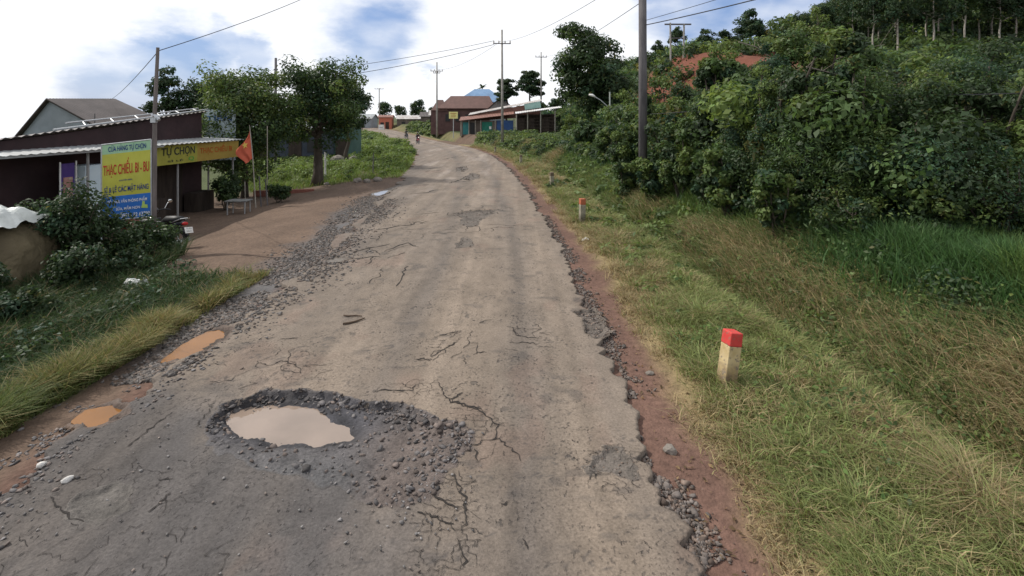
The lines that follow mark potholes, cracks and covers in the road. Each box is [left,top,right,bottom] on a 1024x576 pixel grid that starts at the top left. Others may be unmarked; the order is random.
crack [192,337,329,389]
pothole [202,387,476,510]
pothole [64,398,134,430]
crack [330,205,515,286]
crack [419,319,491,364]
crack [374,379,521,571]
pothole [153,324,236,365]
